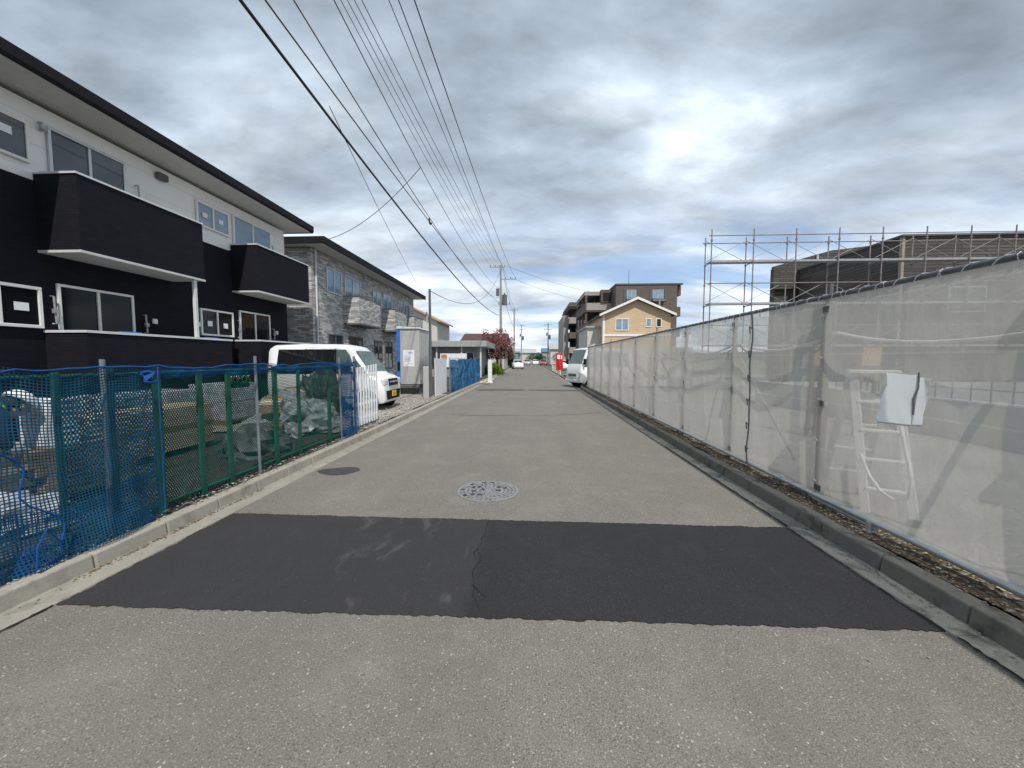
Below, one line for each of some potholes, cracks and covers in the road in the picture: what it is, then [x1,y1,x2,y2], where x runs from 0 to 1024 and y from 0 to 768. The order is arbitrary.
manhole cover [457,481,519,502]
